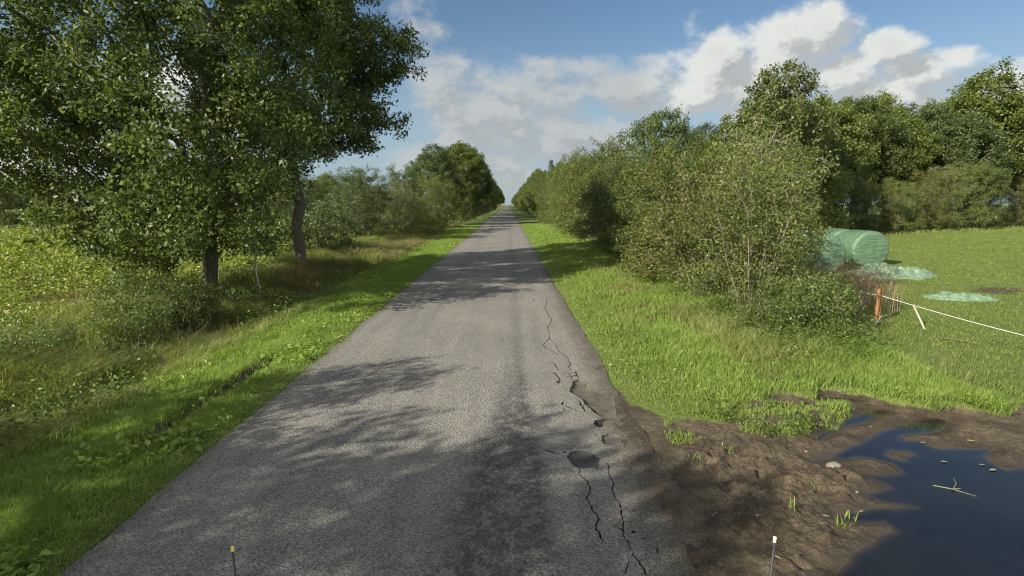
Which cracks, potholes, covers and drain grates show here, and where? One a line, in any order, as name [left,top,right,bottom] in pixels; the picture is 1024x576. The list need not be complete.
crack [533,299,585,412]
pothole [570,379,617,417]
pothole [601,433,621,446]
pothole [567,451,599,469]
crack [546,450,659,576]
